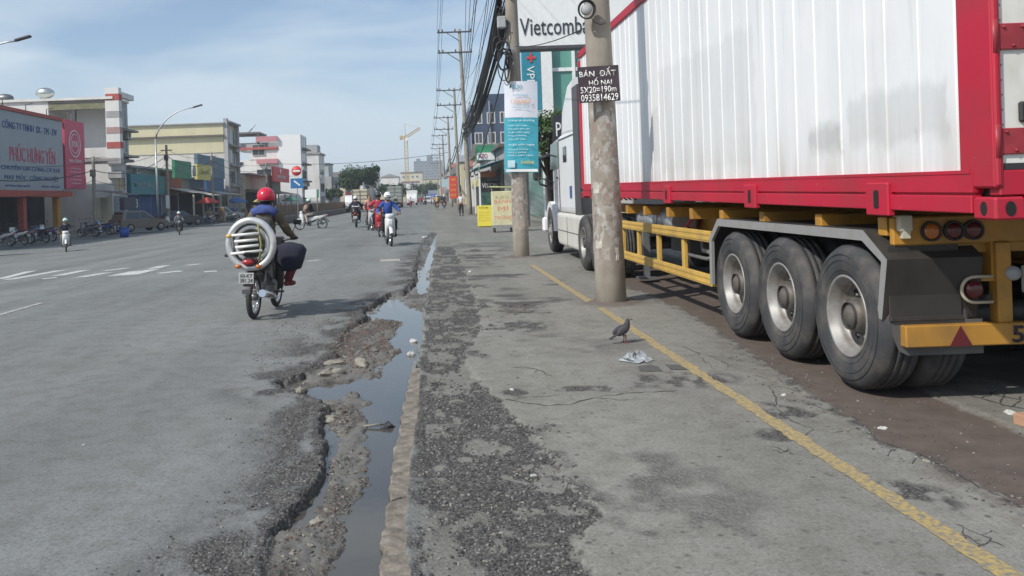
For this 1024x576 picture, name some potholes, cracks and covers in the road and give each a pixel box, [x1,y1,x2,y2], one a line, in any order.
crack [967,391,1024,409]
crack [955,523,1005,547]
pothole [351,288,415,324]
pothole [261,402,346,537]
crack [752,376,871,454]
crack [487,390,676,406]
pothole [263,369,369,406]
pothole [402,264,421,295]
